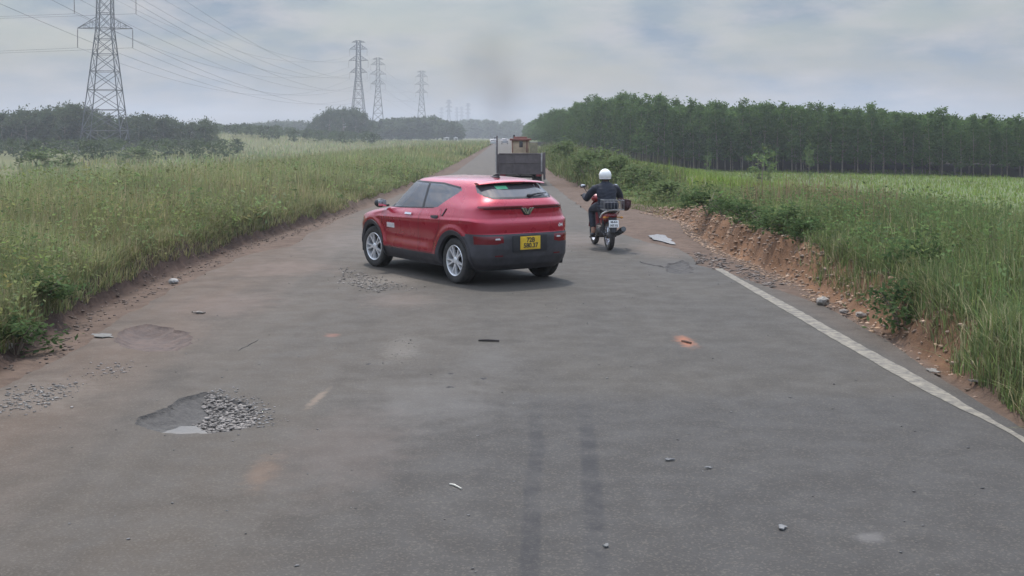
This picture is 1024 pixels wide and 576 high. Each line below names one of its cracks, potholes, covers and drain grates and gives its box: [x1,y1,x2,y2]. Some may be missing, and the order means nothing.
pothole [114,324,193,352]
pothole [135,392,258,433]
